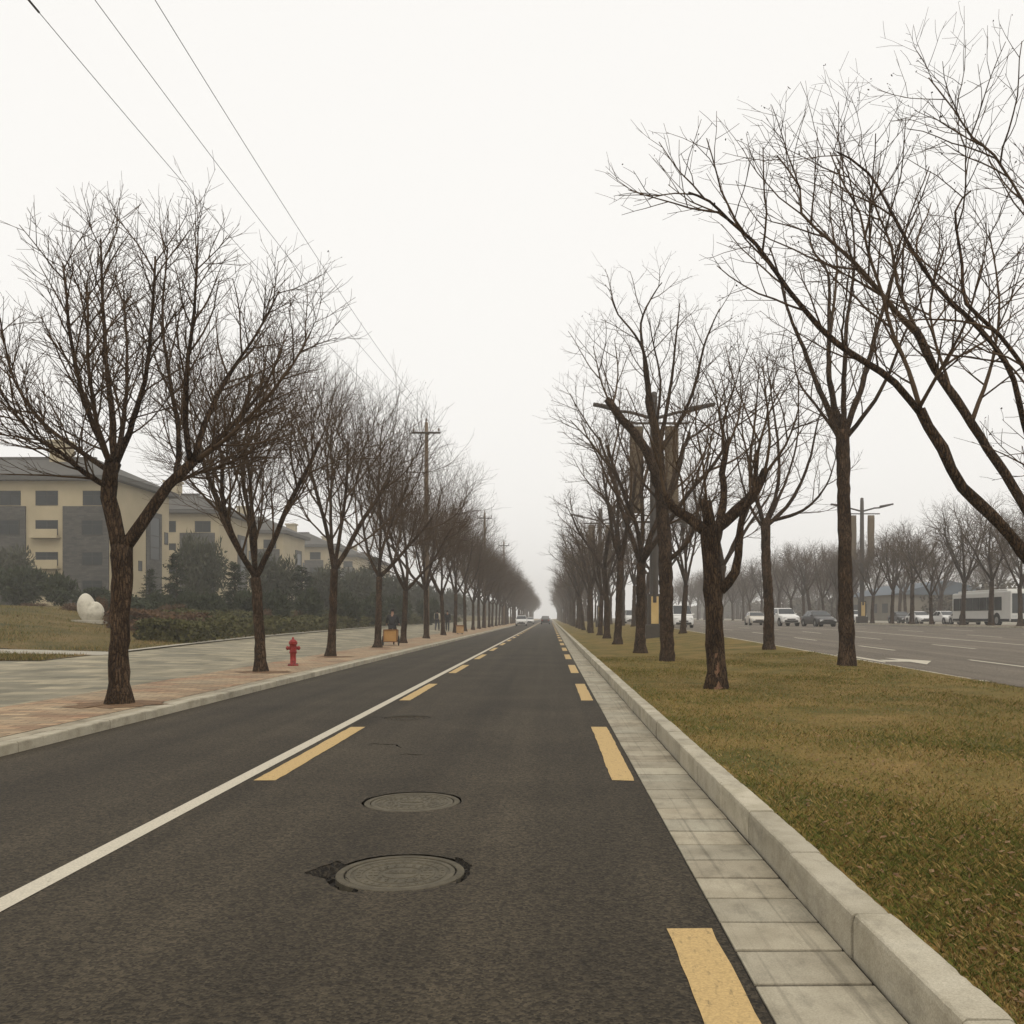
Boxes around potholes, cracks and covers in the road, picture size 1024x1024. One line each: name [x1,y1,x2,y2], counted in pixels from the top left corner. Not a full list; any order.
manhole cover [363,793,461,812]
manhole cover [327,855,465,893]
pothole [454,857,472,884]
pothole [304,861,358,892]
